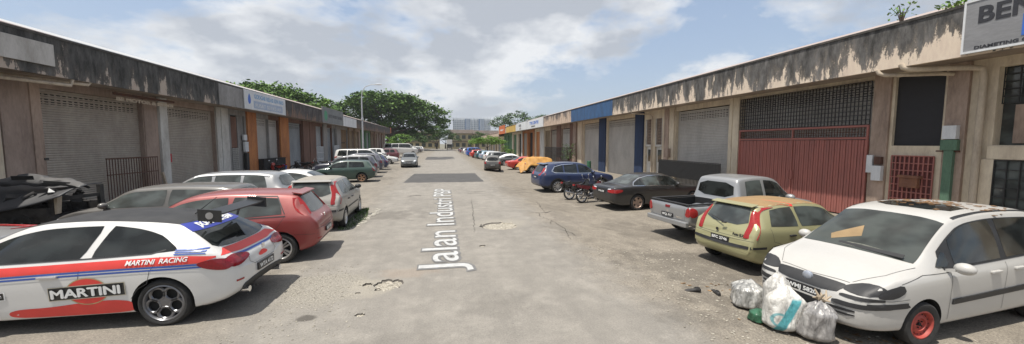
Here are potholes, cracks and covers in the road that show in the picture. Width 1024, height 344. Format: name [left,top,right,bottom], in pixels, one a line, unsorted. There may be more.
pothole [373,279,404,292]
